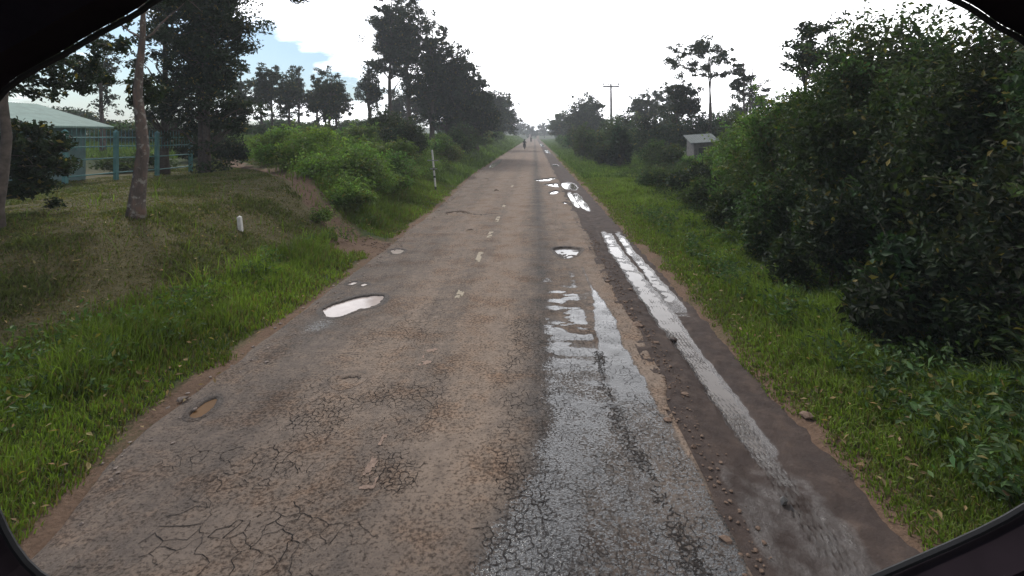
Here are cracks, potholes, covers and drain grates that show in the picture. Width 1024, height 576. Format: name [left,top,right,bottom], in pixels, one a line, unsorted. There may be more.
crack [469,296,738,576]
pothole [550,246,585,259]
pothole [182,393,223,422]
pothole [316,293,389,319]
pothole [329,372,369,390]
crack [138,445,415,576]
